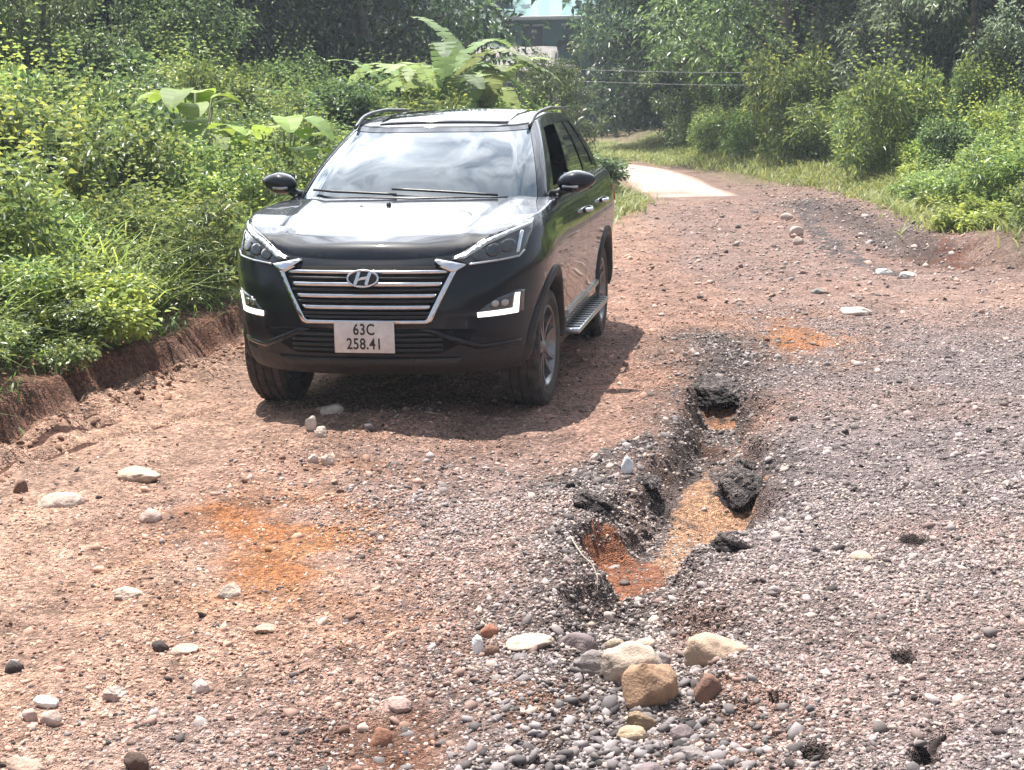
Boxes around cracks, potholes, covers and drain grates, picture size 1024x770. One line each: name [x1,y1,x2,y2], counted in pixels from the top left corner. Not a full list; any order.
pothole [890,648,917,664]
pothole [700,406,737,430]
pothole [580,519,670,602]
pothole [692,431,726,462]
pothole [647,469,771,585]
pothole [898,534,930,546]
